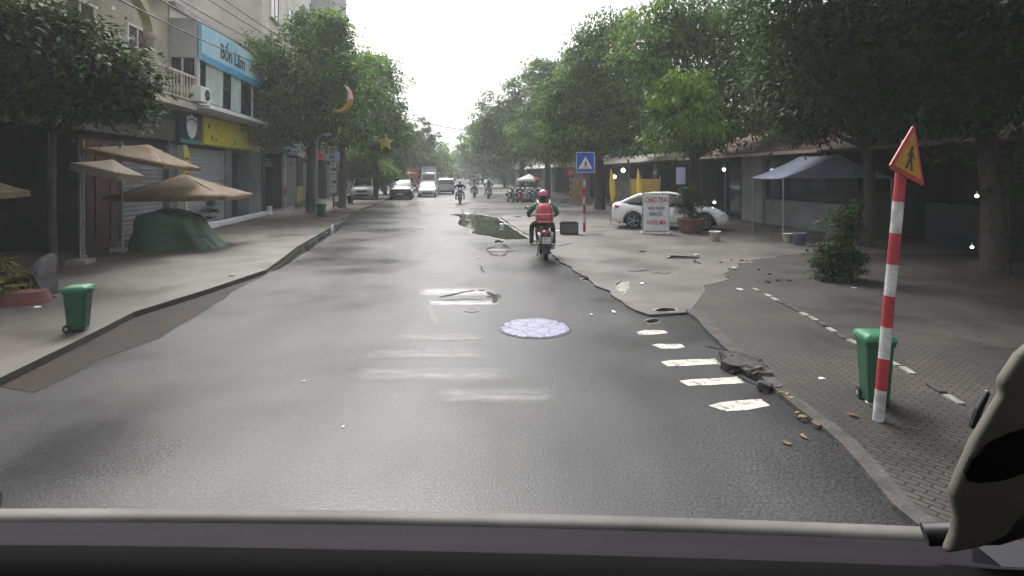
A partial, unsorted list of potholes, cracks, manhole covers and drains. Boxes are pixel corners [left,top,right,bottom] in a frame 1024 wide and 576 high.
manhole cover [499,318,572,339]
pothole [448,214,530,240]
